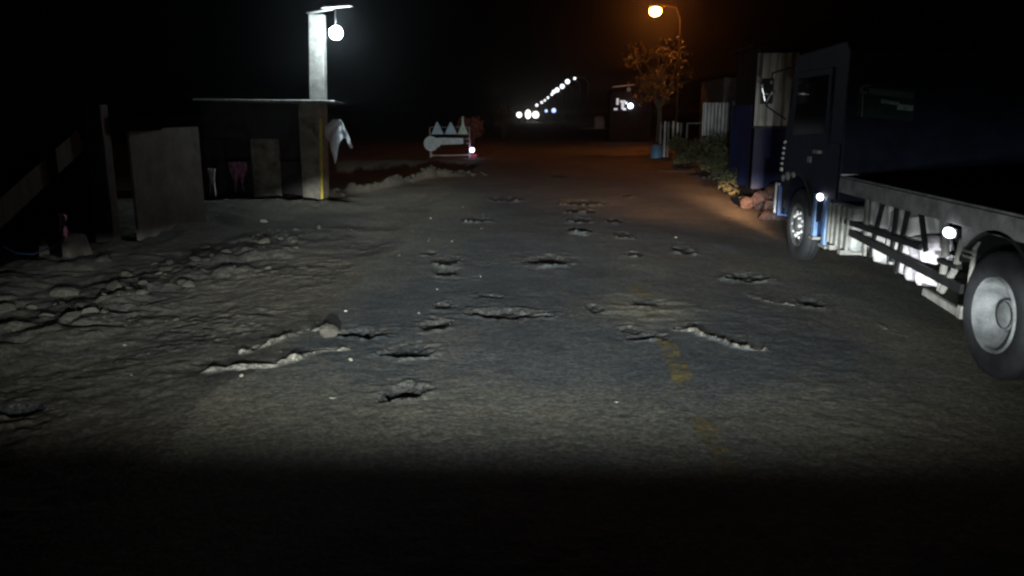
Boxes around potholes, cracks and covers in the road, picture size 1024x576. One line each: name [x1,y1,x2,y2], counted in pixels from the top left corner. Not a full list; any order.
pothole [337,327,393,340]
pothole [433,268,461,277]
pothole [416,315,455,331]
pothole [519,253,571,265]
pothole [793,297,829,308]
pothole [463,307,555,321]
pothole [725,271,772,282]
pothole [373,343,437,358]
pothole [0,402,47,419]
pothole [670,245,697,254]
pothole [434,256,463,266]
pothole [375,379,433,401]
